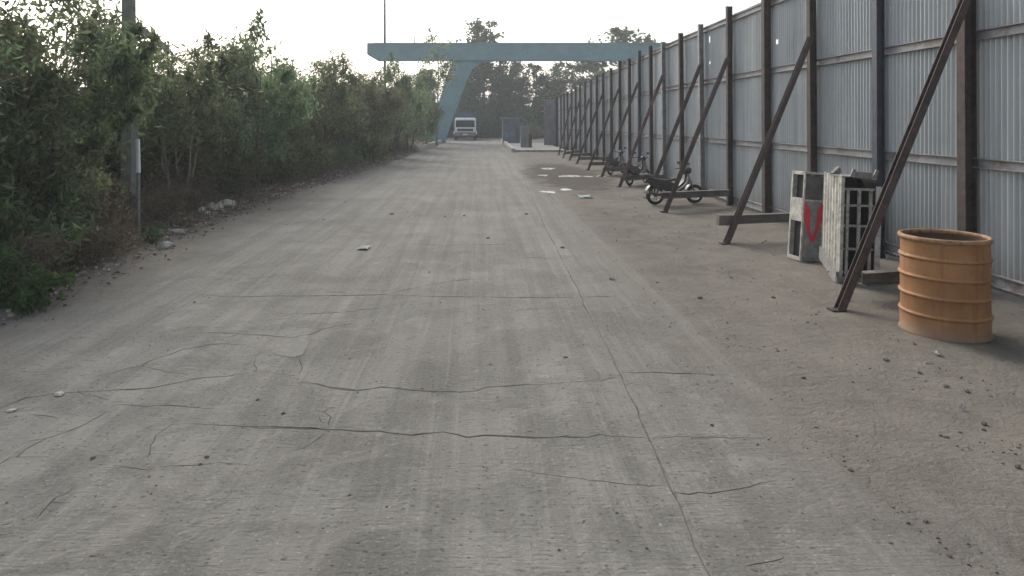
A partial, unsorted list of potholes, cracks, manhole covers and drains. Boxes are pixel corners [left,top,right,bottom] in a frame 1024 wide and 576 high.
crack [0,170,777,576]
